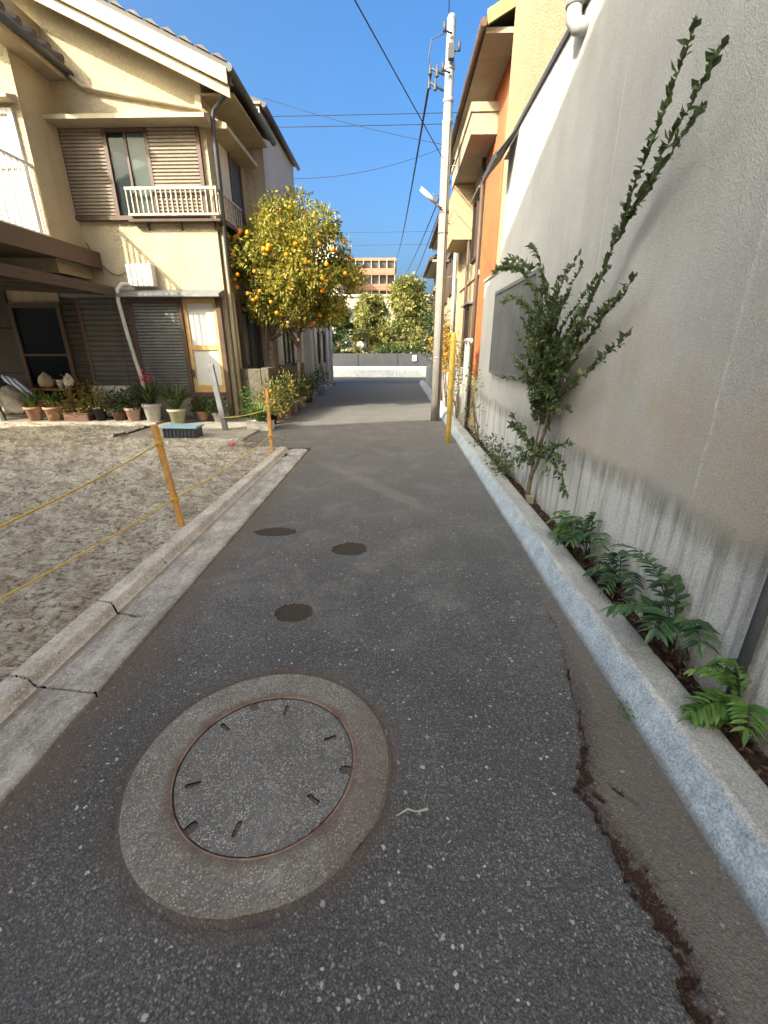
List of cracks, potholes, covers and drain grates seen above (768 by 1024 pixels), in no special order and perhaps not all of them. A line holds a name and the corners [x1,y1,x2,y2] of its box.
manhole cover [119,674,391,919]
crack [549,614,713,1024]
